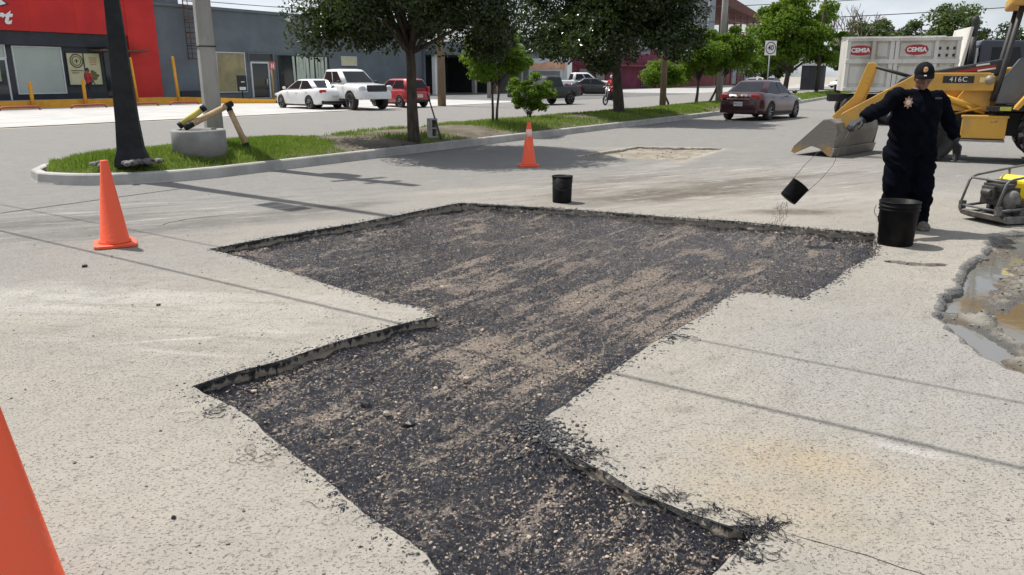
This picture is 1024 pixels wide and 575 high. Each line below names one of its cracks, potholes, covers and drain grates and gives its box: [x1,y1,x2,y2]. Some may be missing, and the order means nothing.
pothole [931,230,1024,374]
crack [786,532,925,575]
